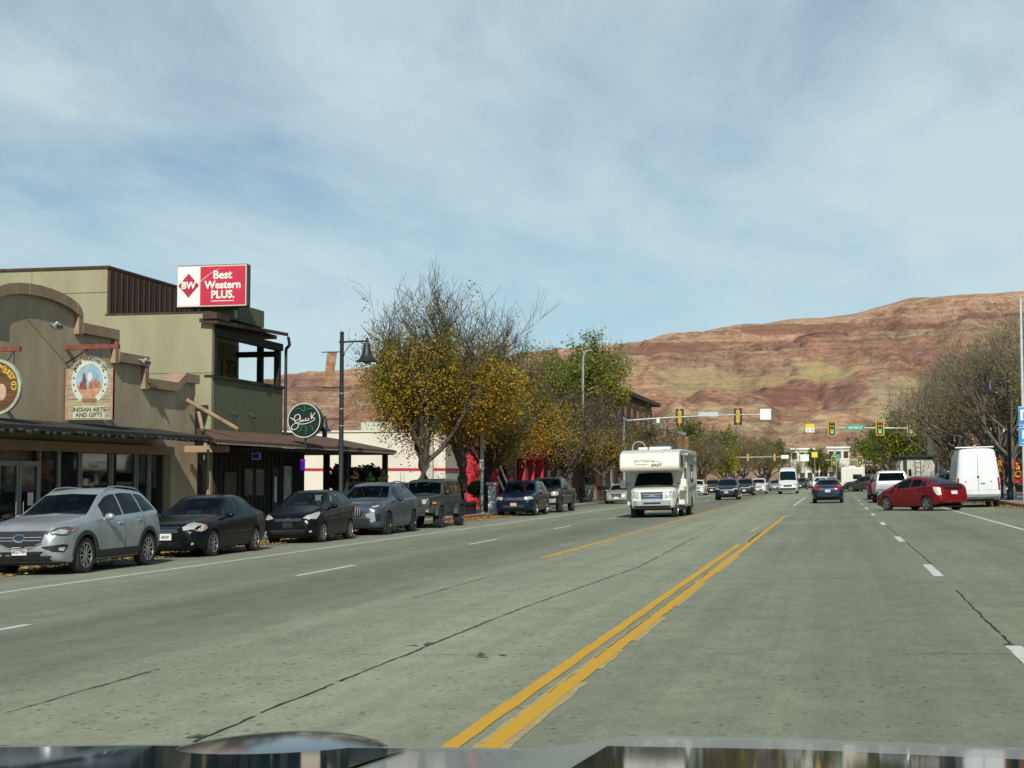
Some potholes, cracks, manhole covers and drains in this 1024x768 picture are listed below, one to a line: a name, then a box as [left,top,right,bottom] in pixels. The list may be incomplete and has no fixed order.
crack [886,525,1013,645]
crack [186,528,712,742]
